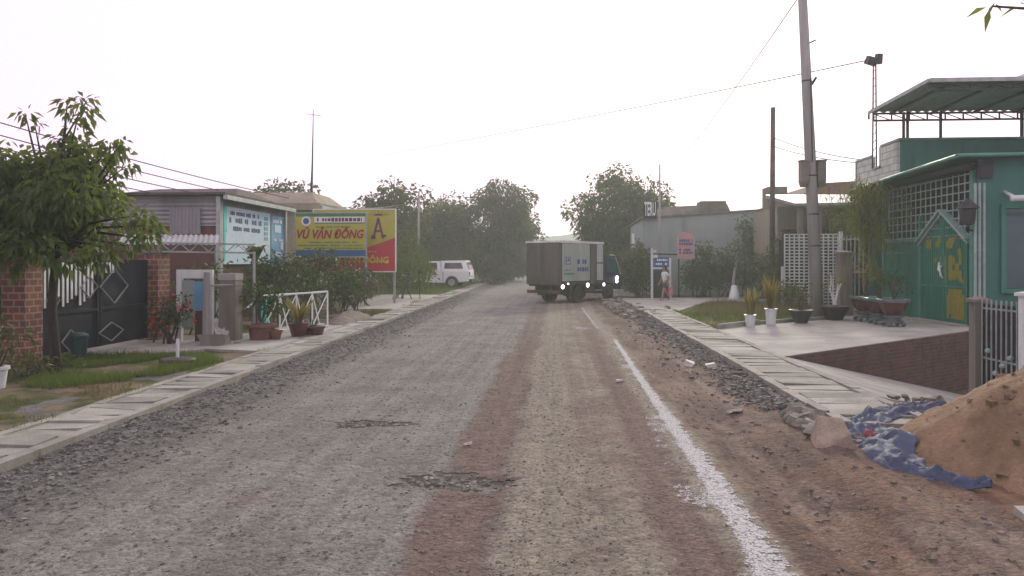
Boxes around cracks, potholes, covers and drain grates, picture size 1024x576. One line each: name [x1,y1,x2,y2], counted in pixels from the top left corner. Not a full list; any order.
pothole [335,420,419,428]
pothole [387,471,517,494]
